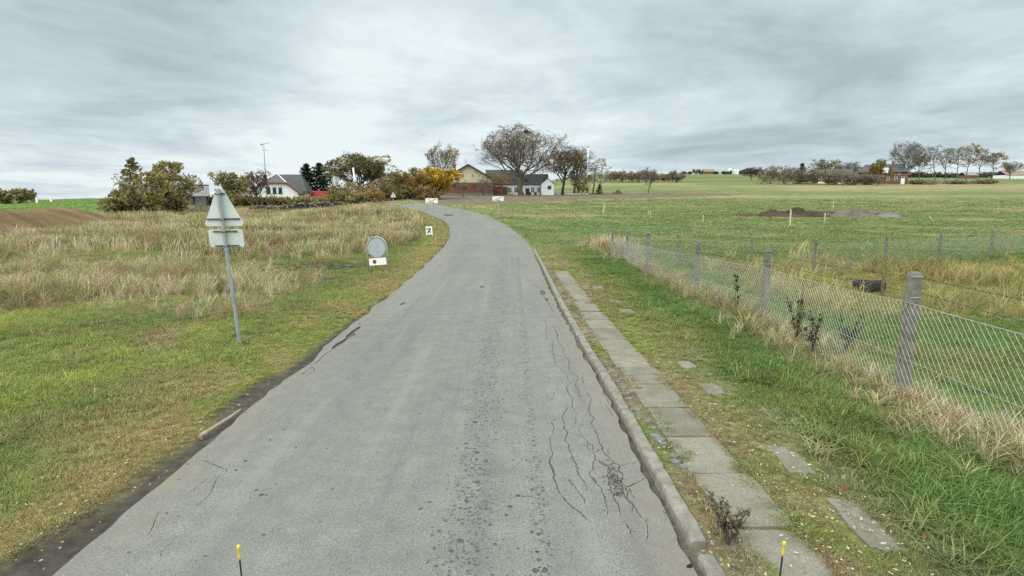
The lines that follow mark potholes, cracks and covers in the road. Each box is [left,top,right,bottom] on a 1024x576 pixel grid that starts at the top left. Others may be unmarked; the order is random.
crack [547,332,667,538]
